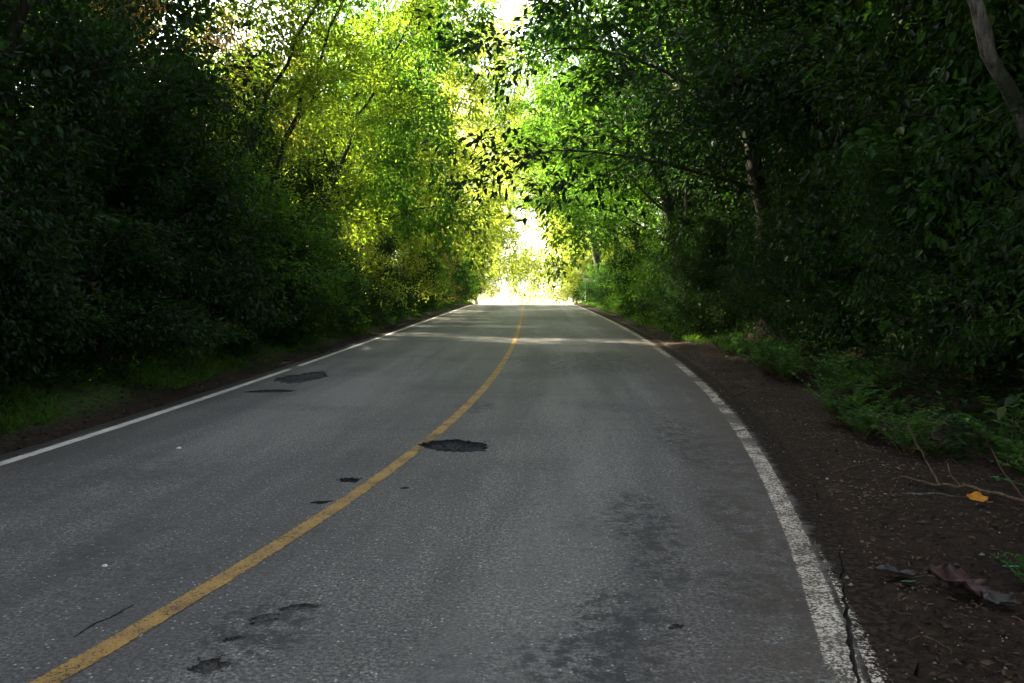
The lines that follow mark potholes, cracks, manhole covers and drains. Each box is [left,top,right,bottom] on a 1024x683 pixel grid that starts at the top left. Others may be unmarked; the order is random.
crack [74,605,132,637]
pothole [274,370,334,386]
pothole [186,654,233,675]
pothole [279,603,324,611]
crack [839,553,861,683]
pothole [418,438,494,454]
pothole [247,613,281,626]
